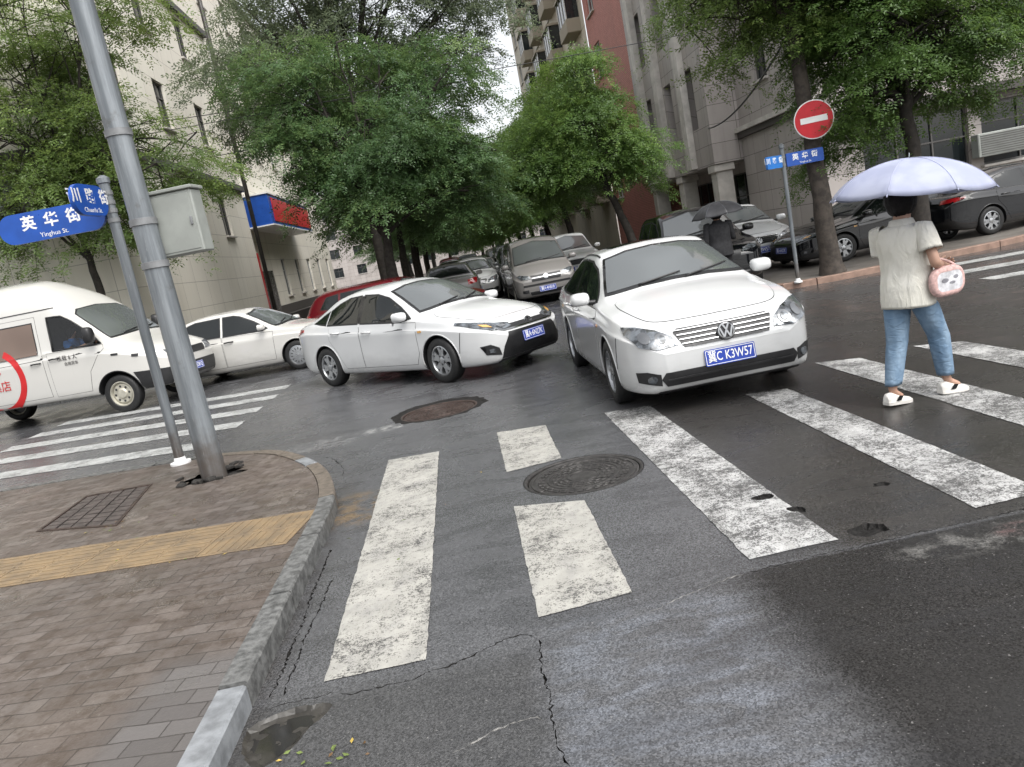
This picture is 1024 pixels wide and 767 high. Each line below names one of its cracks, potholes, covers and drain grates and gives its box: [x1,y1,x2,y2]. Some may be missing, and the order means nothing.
crack [269,550,570,766]
manhole cover [523,454,644,496]
pothole [241,703,332,767]
pothole [846,523,890,537]
manhole cover [391,396,489,424]
